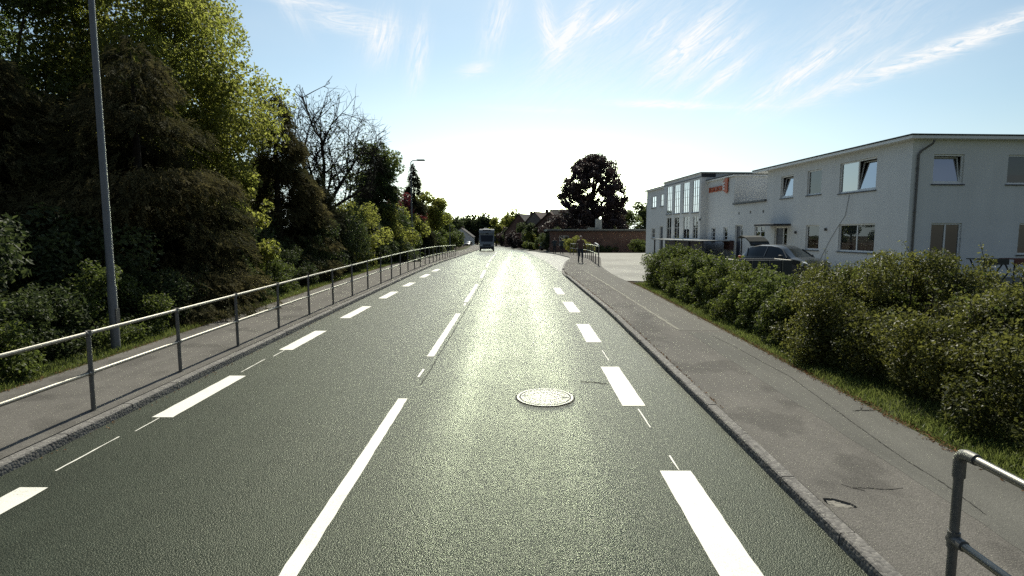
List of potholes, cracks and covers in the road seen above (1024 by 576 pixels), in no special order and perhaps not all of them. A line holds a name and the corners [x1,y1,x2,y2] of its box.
manhole cover [515,388,575,407]
pothole [823,498,858,508]
